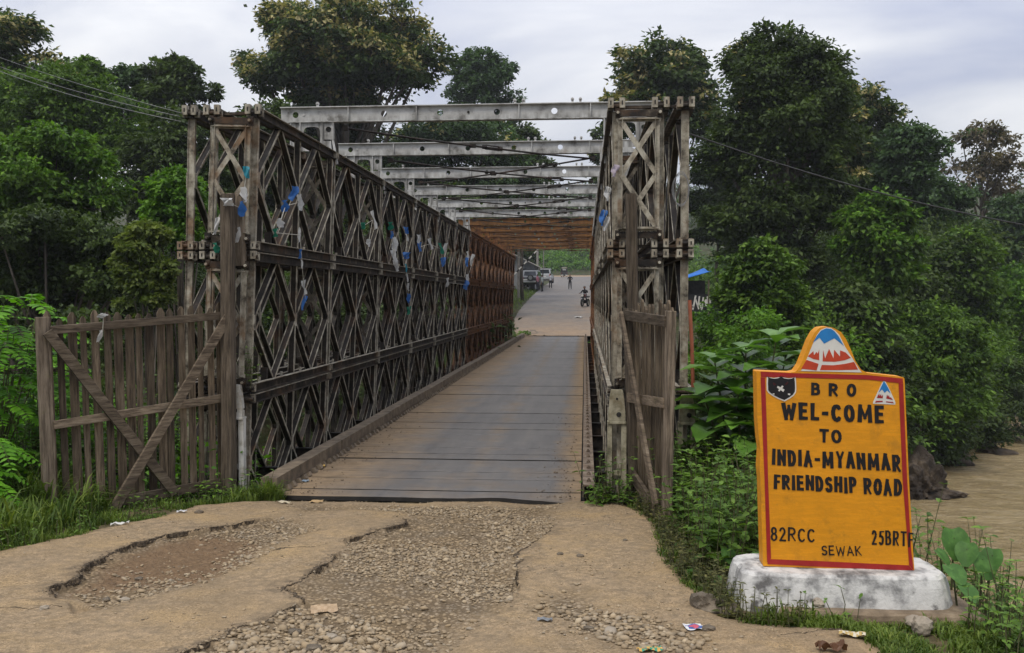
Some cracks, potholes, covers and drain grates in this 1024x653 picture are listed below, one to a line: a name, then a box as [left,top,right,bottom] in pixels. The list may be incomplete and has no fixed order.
pothole [47,515,321,612]
pothole [530,583,709,653]
pothole [180,503,560,653]
